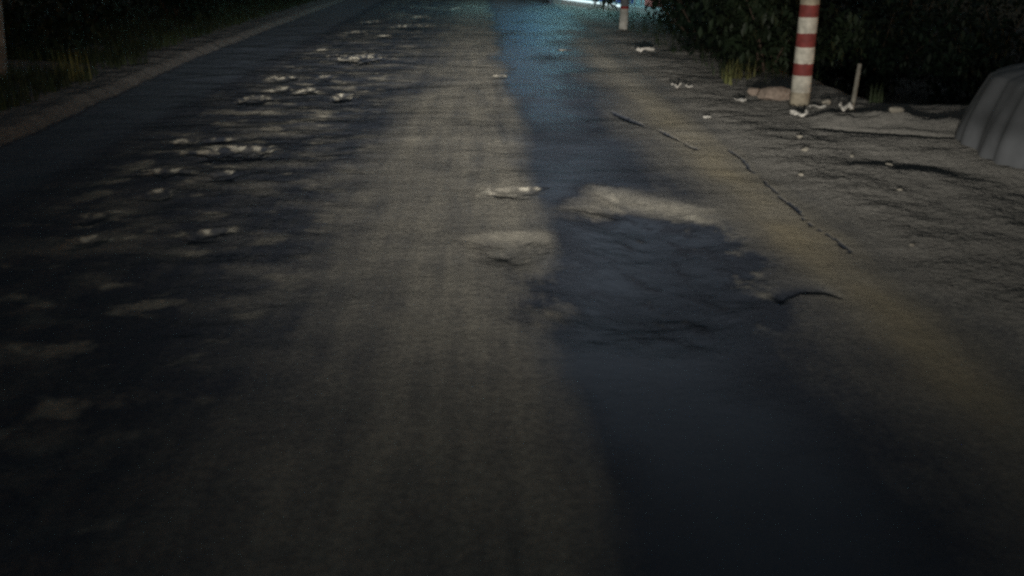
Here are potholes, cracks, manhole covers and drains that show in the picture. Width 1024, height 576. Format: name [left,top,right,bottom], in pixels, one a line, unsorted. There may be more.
pothole [331,93,355,104]
pothole [487,186,548,201]
crack [728,148,853,254]
pothole [288,86,320,98]
pothole [452,230,564,272]
pothole [227,95,280,107]
pothole [180,227,237,245]
crack [610,111,701,150]
pothole [204,170,243,183]
pothole [264,76,305,84]
pothole [176,145,278,165]
pothole [329,53,393,67]
